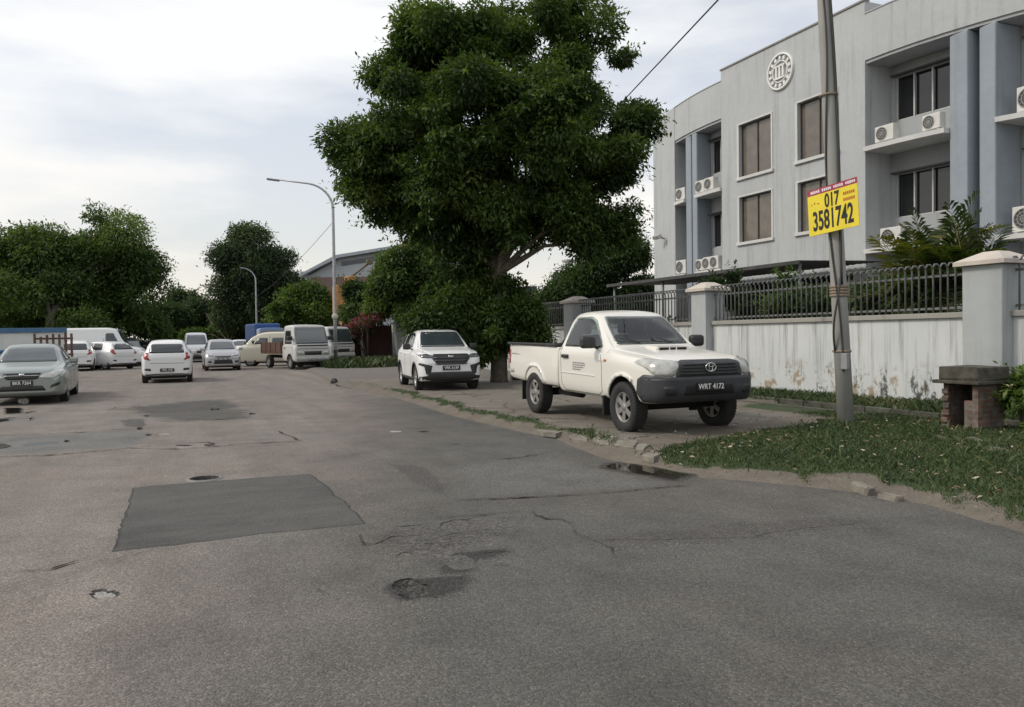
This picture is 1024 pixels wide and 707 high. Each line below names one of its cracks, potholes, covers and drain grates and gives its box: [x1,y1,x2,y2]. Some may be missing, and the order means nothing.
pothole [393,579,430,601]
crack [359,510,615,556]
pothole [89,589,120,599]
crack [23,431,302,456]
